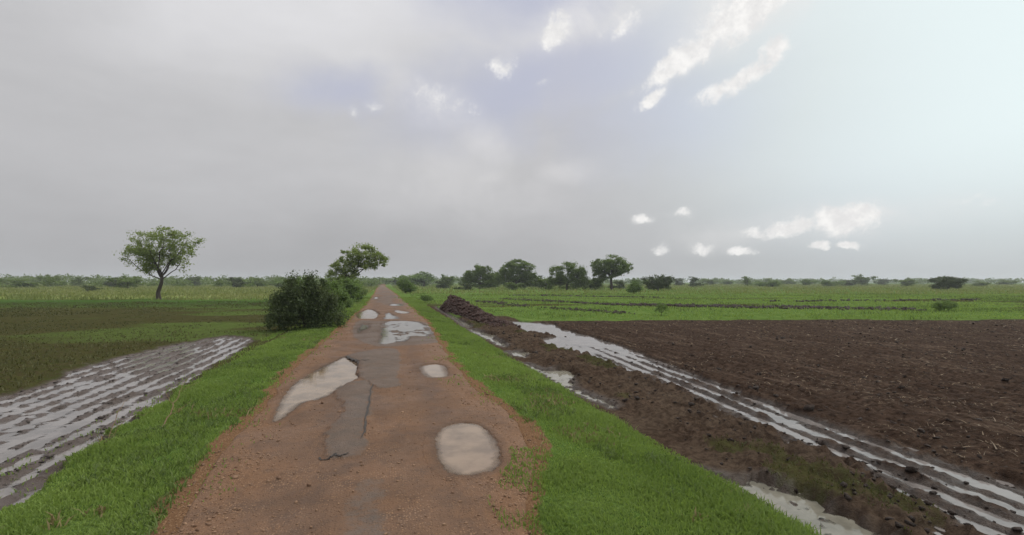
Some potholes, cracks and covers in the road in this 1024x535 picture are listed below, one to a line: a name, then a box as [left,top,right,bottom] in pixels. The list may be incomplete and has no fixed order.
pothole [370,320,435,345]
pothole [262,355,366,424]
pothole [412,362,456,379]
pothole [377,312,404,320]
pothole [353,309,385,319]
pothole [422,420,514,480]
